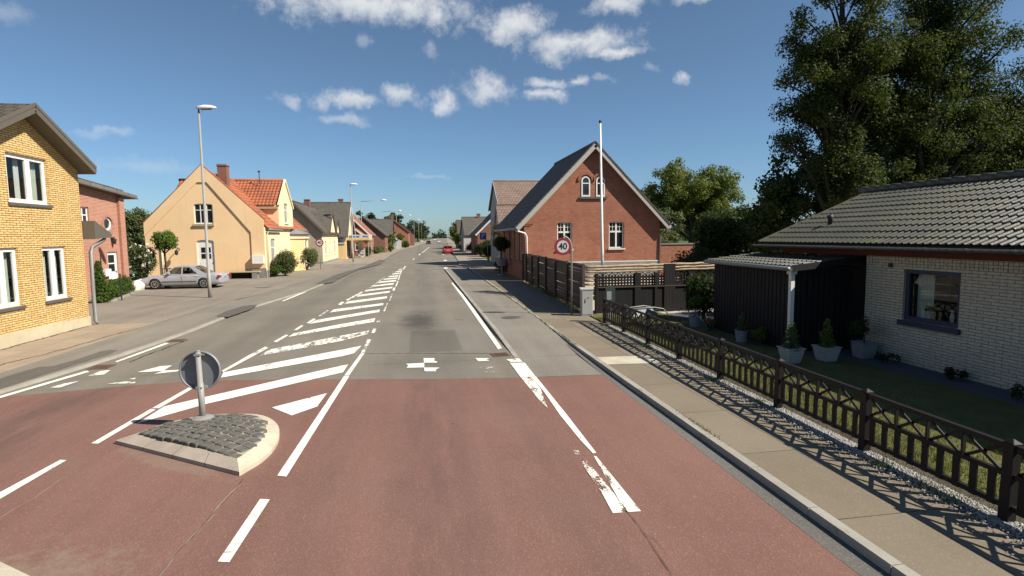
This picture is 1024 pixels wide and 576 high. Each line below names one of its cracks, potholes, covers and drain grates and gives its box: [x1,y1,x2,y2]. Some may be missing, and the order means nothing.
crack [159,479,243,576]
